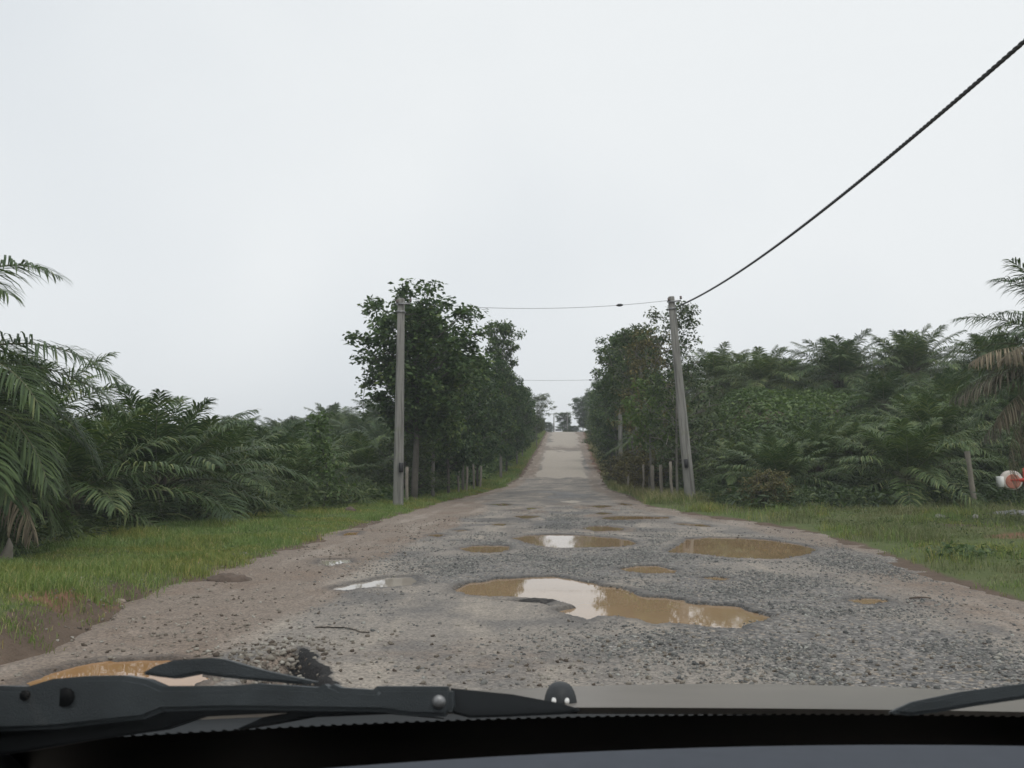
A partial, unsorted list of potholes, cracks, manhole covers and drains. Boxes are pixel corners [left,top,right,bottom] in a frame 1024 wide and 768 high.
pothole [827,595,908,608]
pothole [603,563,694,576]
pothole [0,653,223,686]
pothole [571,525,637,533]
pothole [444,544,525,555]
pothole [316,573,435,593]
pothole [653,535,833,561]
pothole [440,573,795,633]
pothole [498,533,652,549]
